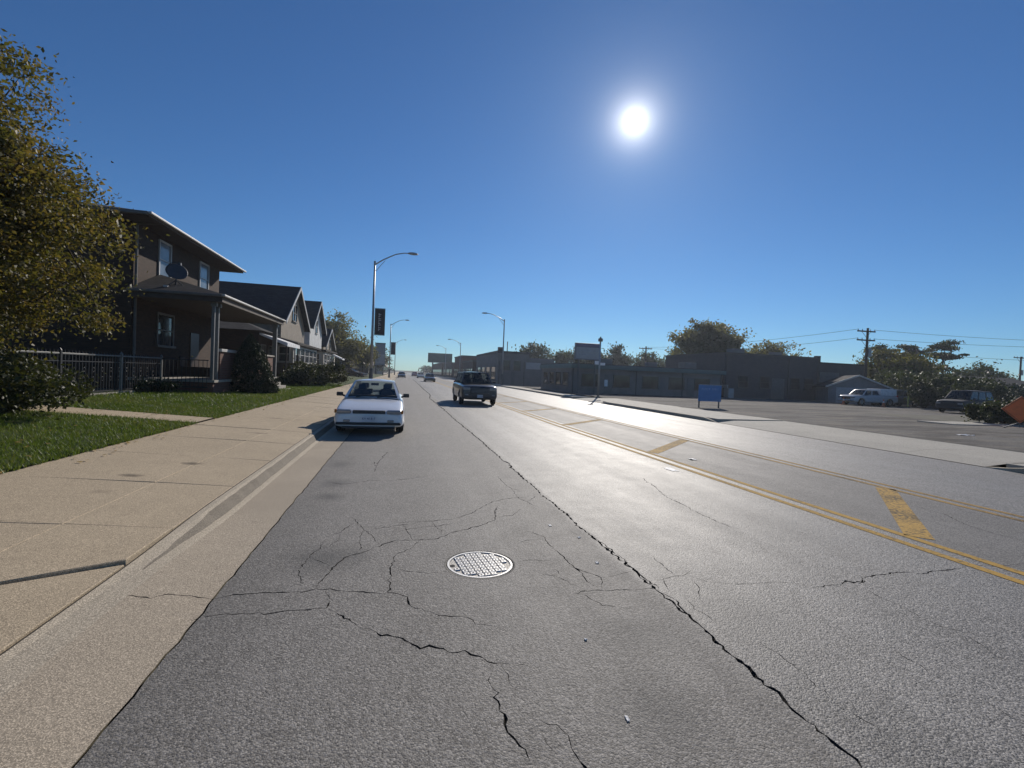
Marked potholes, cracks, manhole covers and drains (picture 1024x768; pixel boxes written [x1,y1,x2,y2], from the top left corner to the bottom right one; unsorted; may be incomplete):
crack [129,476,587,768]
manhole cover [444,551,515,579]
crack [762,644,889,742]
crack [520,531,1023,661]
